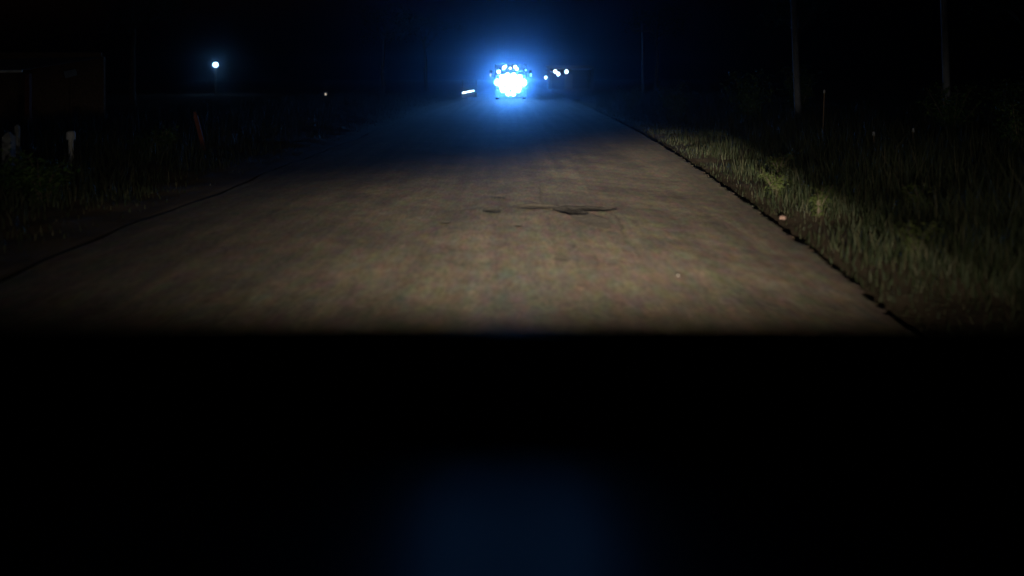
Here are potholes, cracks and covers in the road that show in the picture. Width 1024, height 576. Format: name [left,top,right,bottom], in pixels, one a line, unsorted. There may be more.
pothole [552,205,617,215]
